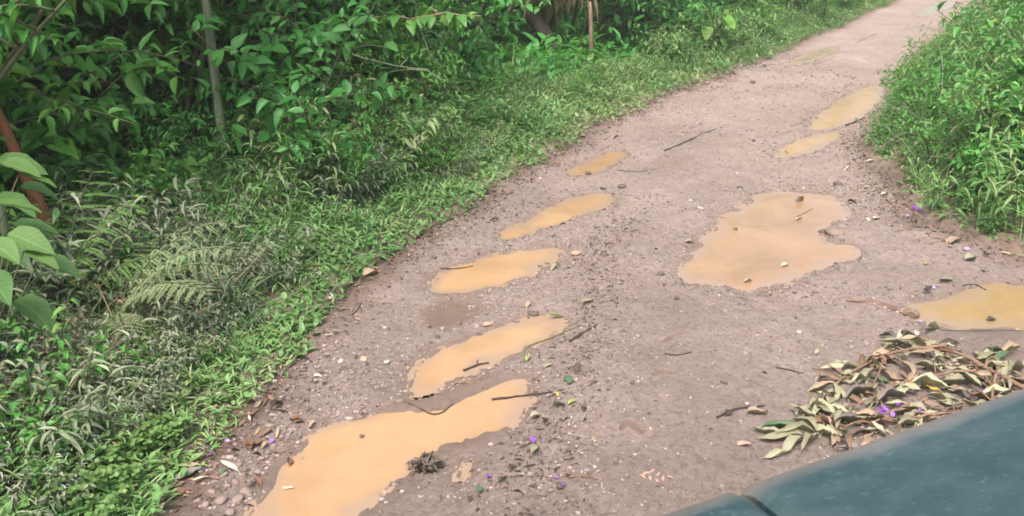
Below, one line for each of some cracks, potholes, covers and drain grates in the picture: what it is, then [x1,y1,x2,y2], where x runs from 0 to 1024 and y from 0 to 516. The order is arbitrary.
pothole [566,151,627,176]
pothole [406,315,568,400]
pothole [495,193,615,240]
pothole [806,85,885,130]
pothole [912,1,955,16]
pothole [676,191,861,293]
pothole [789,46,840,65]
pothole [900,282,1024,330]
pothole [243,372,537,516]
pothole [775,130,843,159]
pothole [428,246,565,296]
